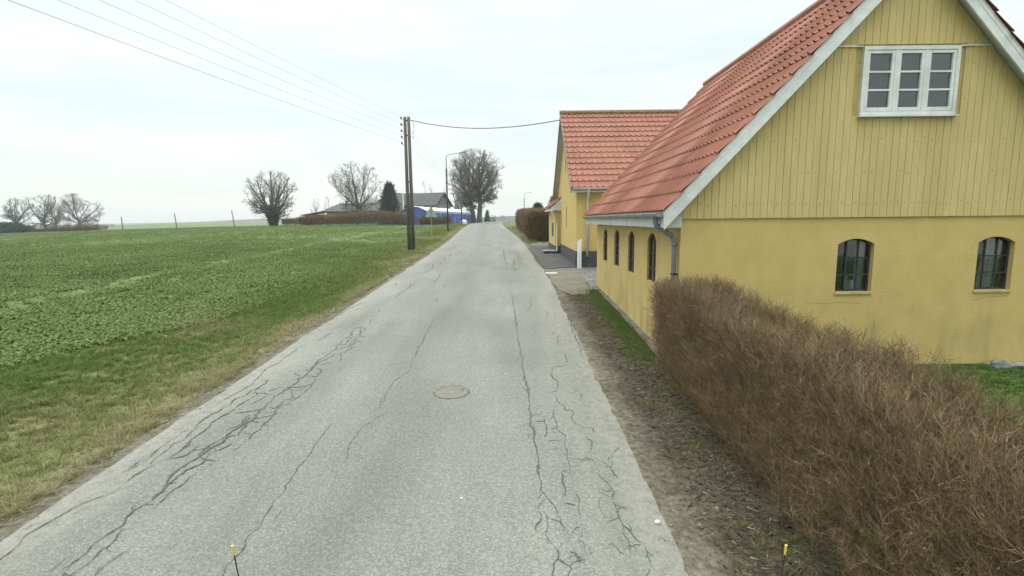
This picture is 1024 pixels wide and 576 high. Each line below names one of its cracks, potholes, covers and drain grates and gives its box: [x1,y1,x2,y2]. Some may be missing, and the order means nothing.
crack [510,291,657,576]
manhole cover [433,385,469,399]
crack [0,254,451,576]
